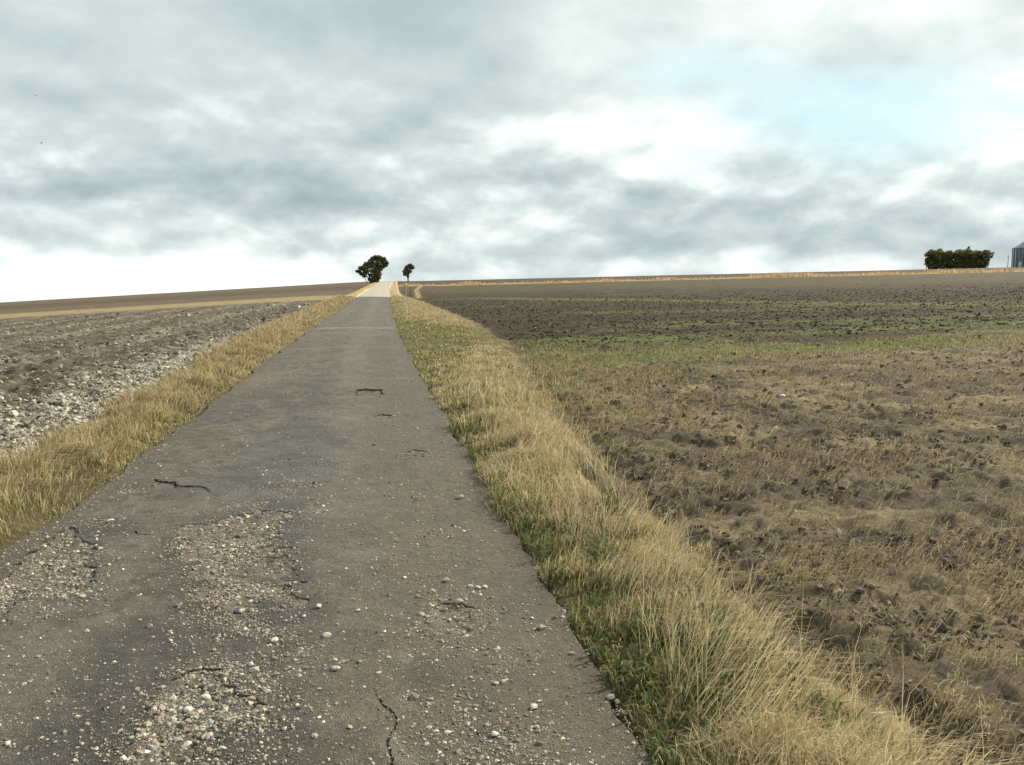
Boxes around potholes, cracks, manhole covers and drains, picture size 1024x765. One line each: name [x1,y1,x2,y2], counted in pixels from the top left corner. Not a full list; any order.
pothole [168,510,310,617]
crack [155,479,210,493]
pothole [123,667,268,765]
crack [373,688,398,765]
